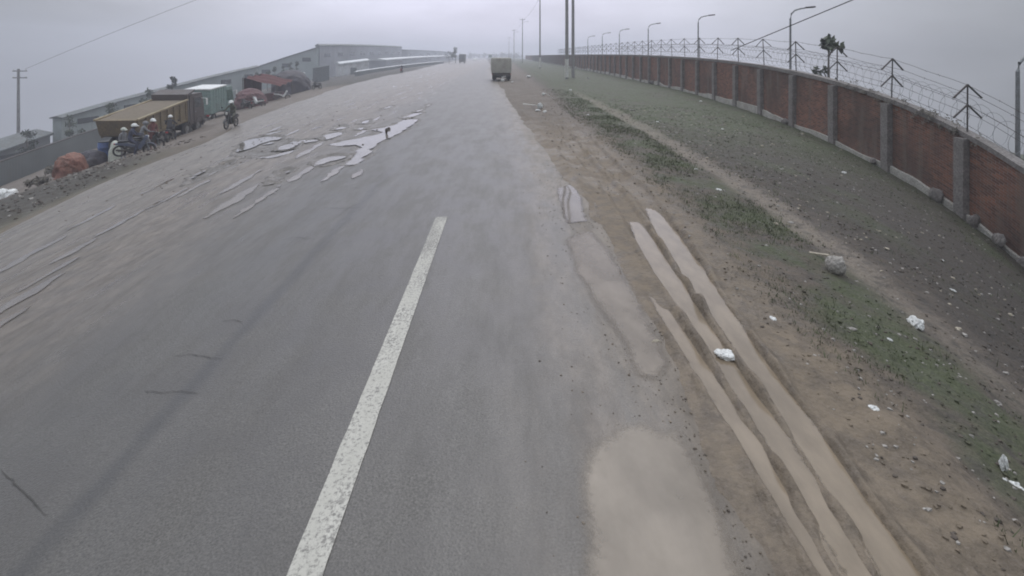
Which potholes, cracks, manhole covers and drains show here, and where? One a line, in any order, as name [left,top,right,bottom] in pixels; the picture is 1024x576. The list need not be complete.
crack [1,470,46,515]
pothole [261,166,300,186]
pothole [230,134,305,160]
pothole [307,152,353,167]
pothole [270,136,326,152]
pothole [325,117,423,168]
pothole [313,131,347,141]
